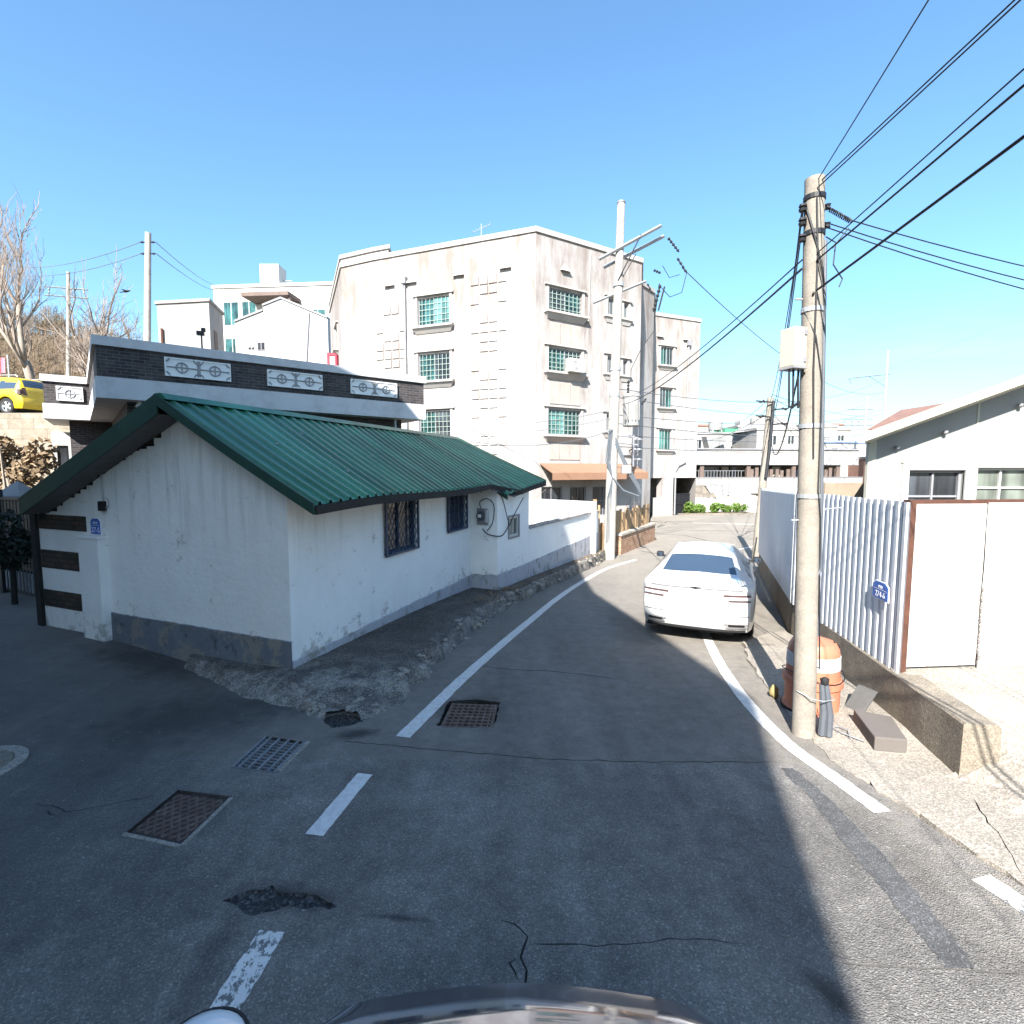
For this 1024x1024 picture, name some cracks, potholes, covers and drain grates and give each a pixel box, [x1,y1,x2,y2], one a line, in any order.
drain grate [231,736,311,773]
manhole cover [122,790,233,848]
crack [974,799,1021,873]
crack [36,796,151,815]
pothole [222,885,336,916]
drain grate [437,700,499,728]
pothole [323,713,362,728]
crack [501,920,744,983]
